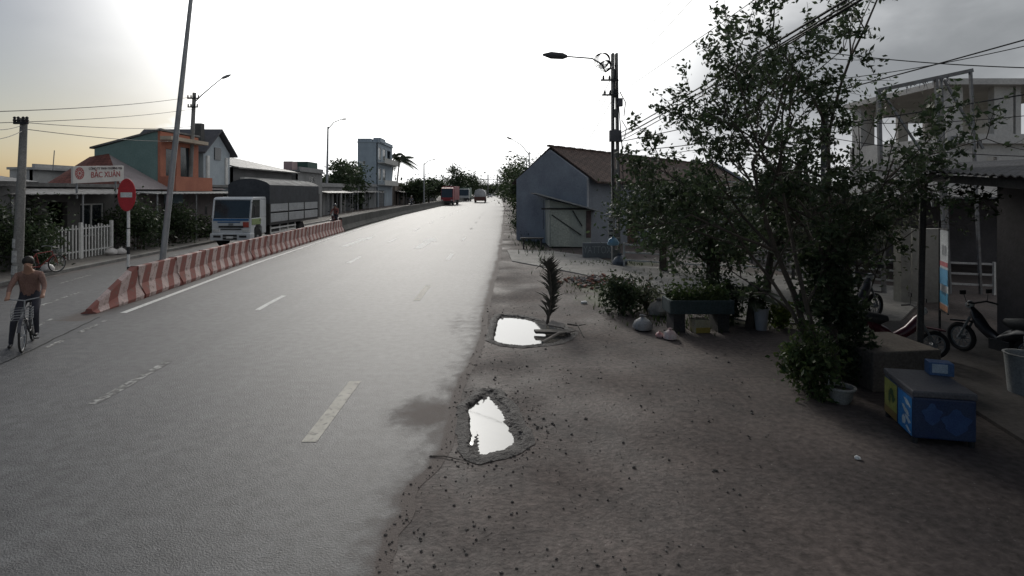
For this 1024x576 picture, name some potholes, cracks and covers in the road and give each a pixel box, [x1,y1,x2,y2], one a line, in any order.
pothole [455,388,535,464]
pothole [485,314,578,348]
